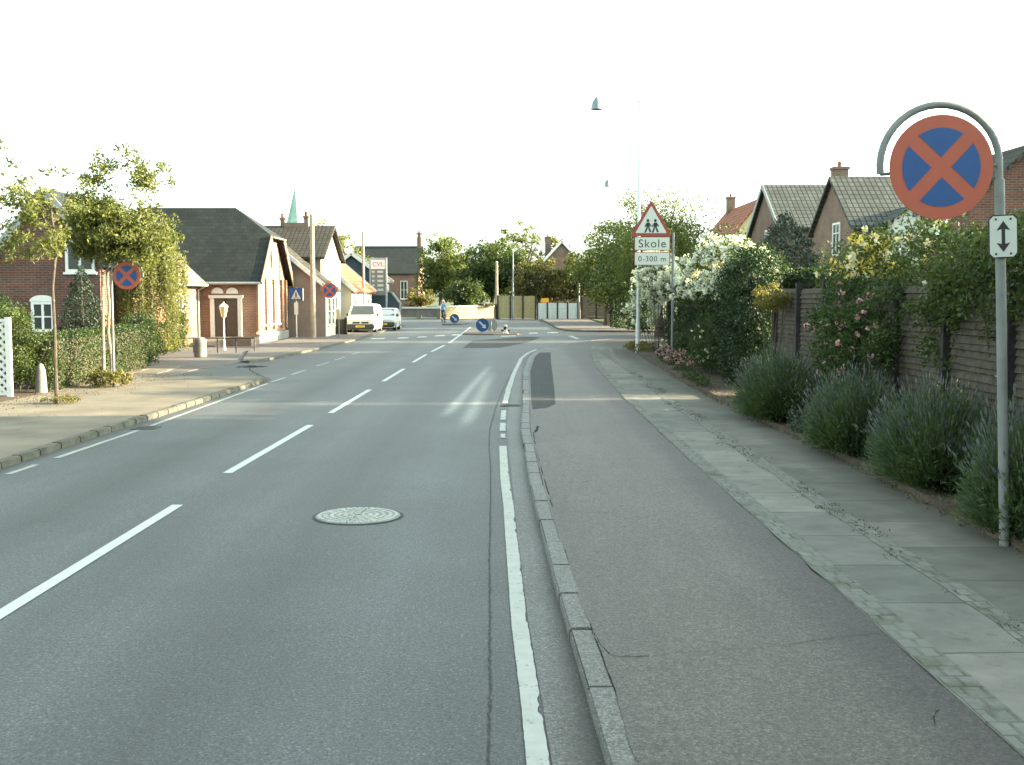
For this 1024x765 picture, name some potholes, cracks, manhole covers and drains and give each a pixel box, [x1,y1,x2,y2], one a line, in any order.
crack [591,626,878,657]
manhole cover [312,507,404,525]
